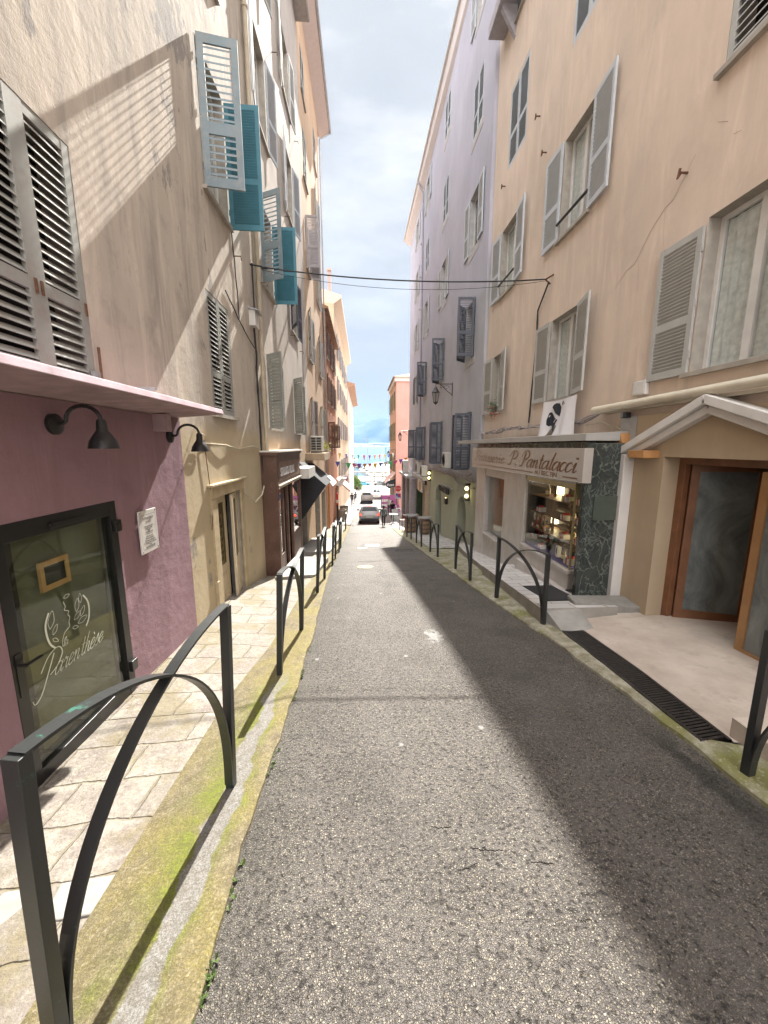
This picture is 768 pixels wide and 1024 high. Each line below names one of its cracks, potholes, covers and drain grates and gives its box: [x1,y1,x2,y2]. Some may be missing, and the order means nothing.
drain grate [562,630,735,744]
